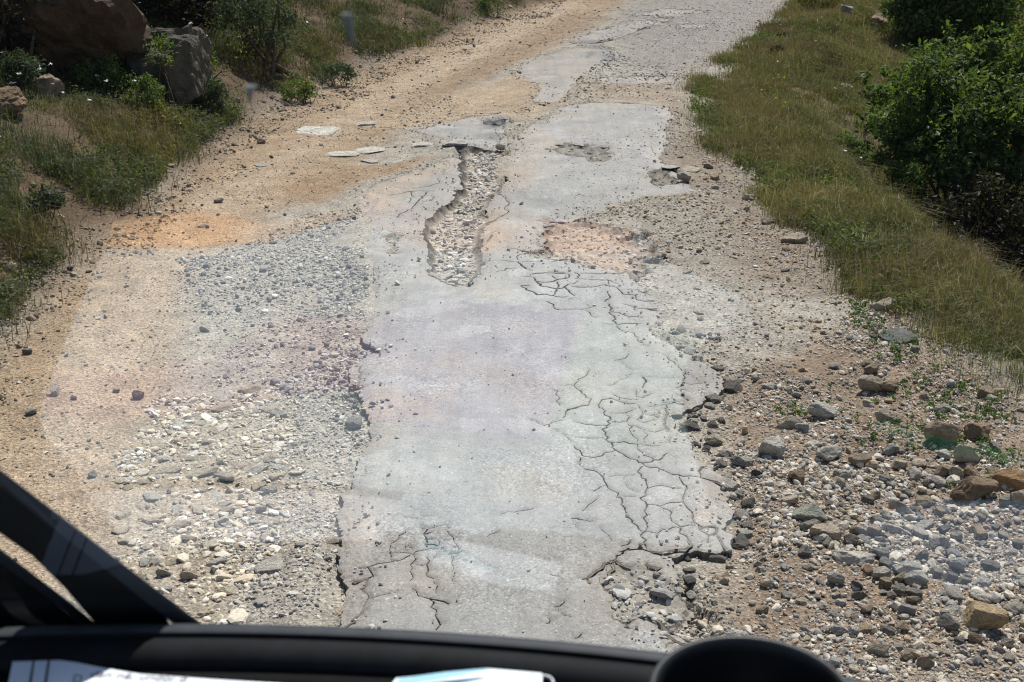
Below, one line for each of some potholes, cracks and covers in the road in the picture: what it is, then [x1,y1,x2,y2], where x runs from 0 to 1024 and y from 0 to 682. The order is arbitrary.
pothole [545,143,612,163]
crack [344,531,454,627]
crack [556,340,727,584]
pothole [648,168,680,186]
crack [505,250,658,337]
pothole [539,220,655,281]
pothole [422,146,506,287]
